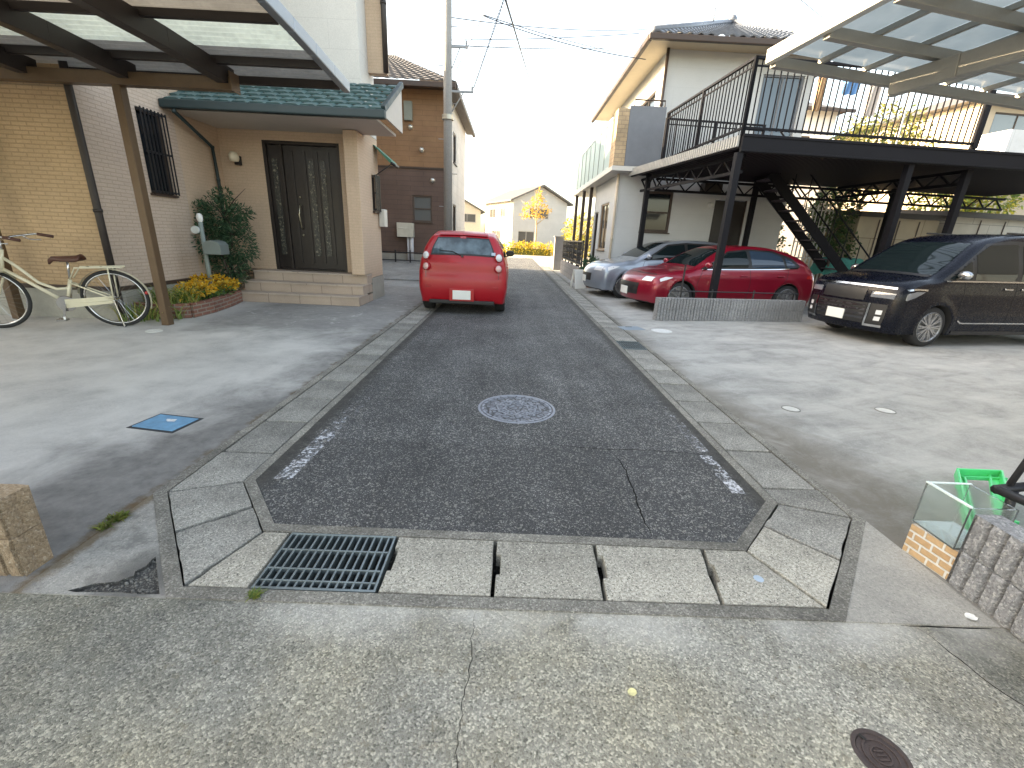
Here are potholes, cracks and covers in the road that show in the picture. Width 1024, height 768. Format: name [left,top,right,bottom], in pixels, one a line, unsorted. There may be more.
manhole cover [478,395,555,424]
utility cover [126,414,204,433]
crack [455,618,474,768]
crack [557,445,711,536]
pothole [68,557,160,594]
crack [901,625,1024,706]
manhole cover [850,728,914,768]
drain grate [251,532,397,593]
